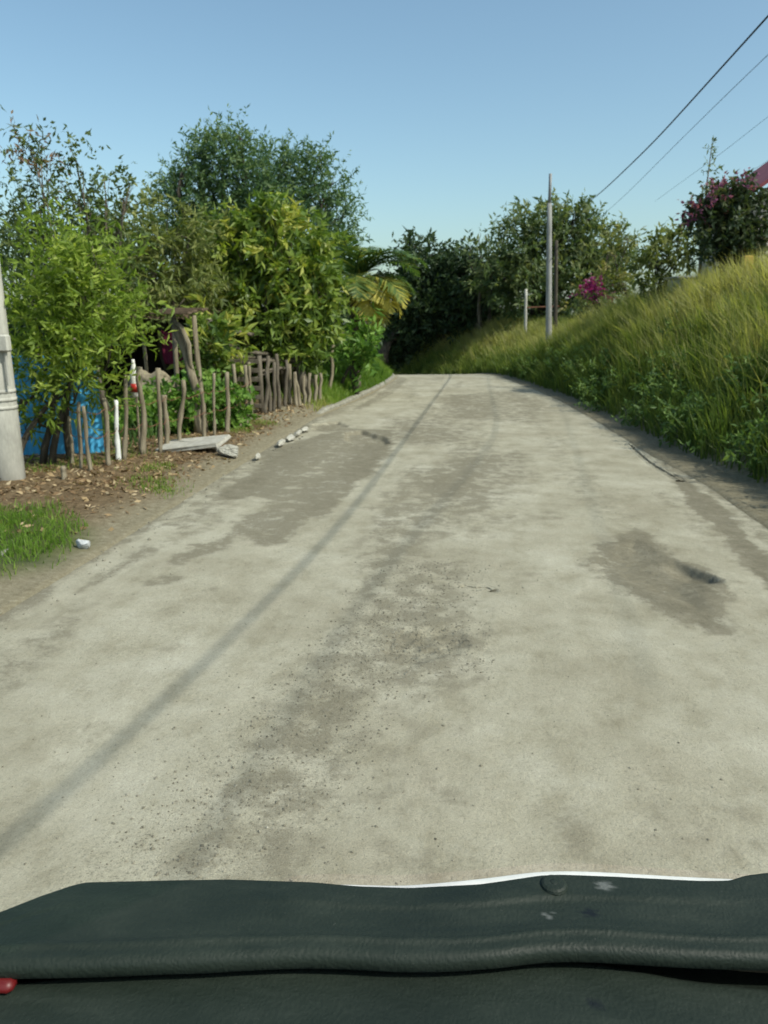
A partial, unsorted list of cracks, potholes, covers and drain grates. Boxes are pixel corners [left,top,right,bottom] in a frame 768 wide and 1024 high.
crack [623,443,684,482]
pothole [338,429,395,448]
